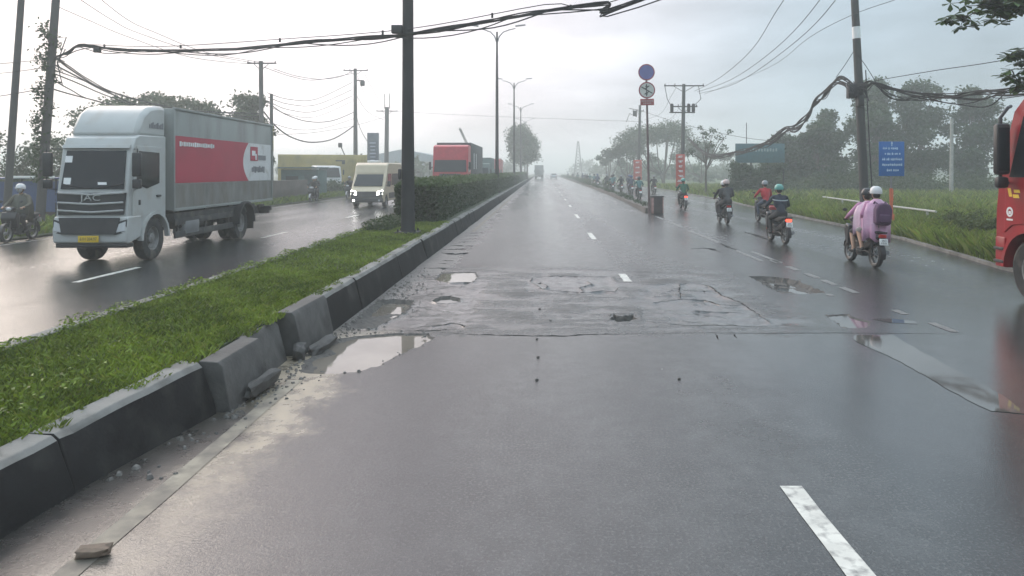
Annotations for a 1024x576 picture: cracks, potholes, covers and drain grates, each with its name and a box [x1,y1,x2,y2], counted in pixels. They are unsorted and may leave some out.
pothole [749,276,825,294]
pothole [283,332,436,376]
crack [649,283,788,340]
pothole [432,296,461,304]
pothole [435,272,479,283]
pothole [610,313,642,322]
pothole [825,314,872,328]
